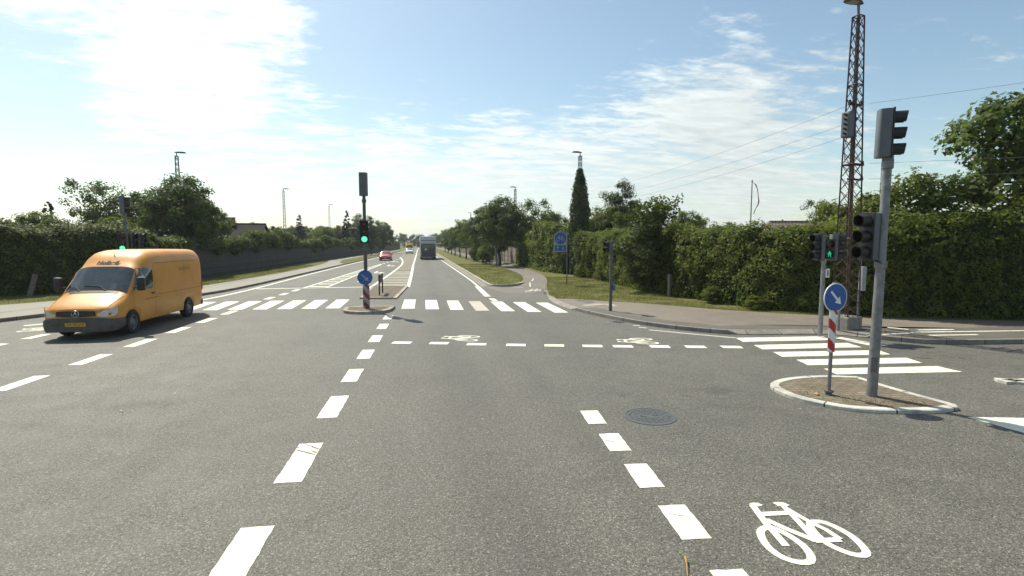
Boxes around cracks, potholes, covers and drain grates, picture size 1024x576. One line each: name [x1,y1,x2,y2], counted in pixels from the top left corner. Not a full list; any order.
manhole cover [623,407,677,425]
